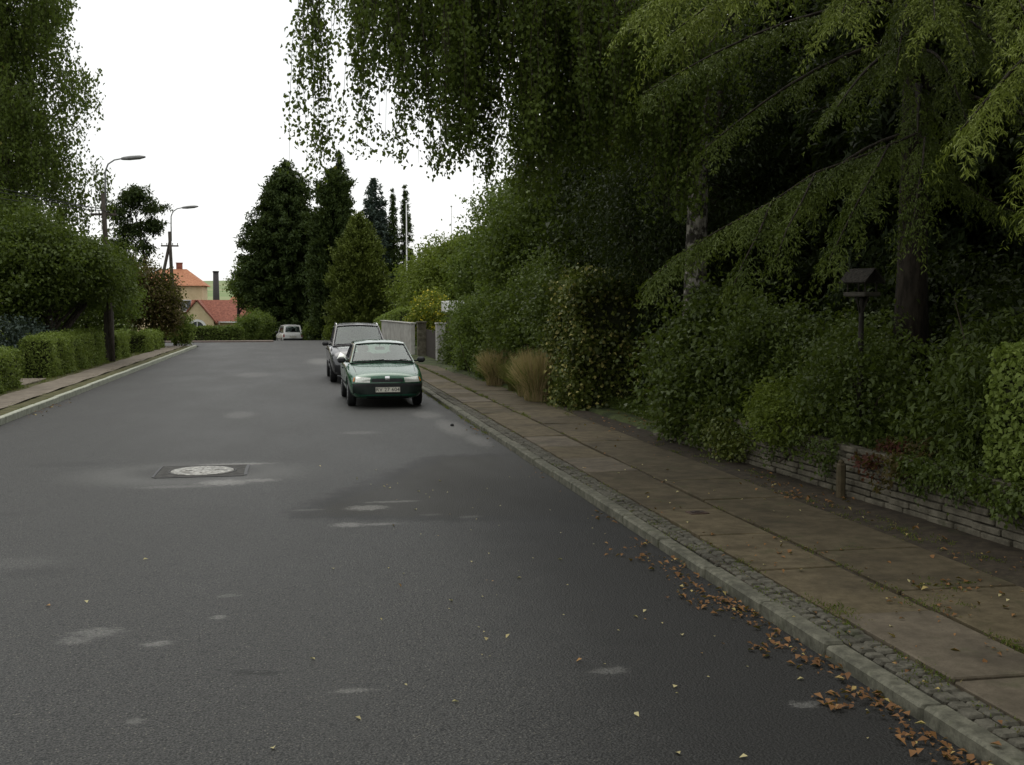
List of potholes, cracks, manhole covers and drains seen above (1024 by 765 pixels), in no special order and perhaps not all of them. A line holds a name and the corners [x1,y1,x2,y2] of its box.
manhole cover [151,464,250,478]
